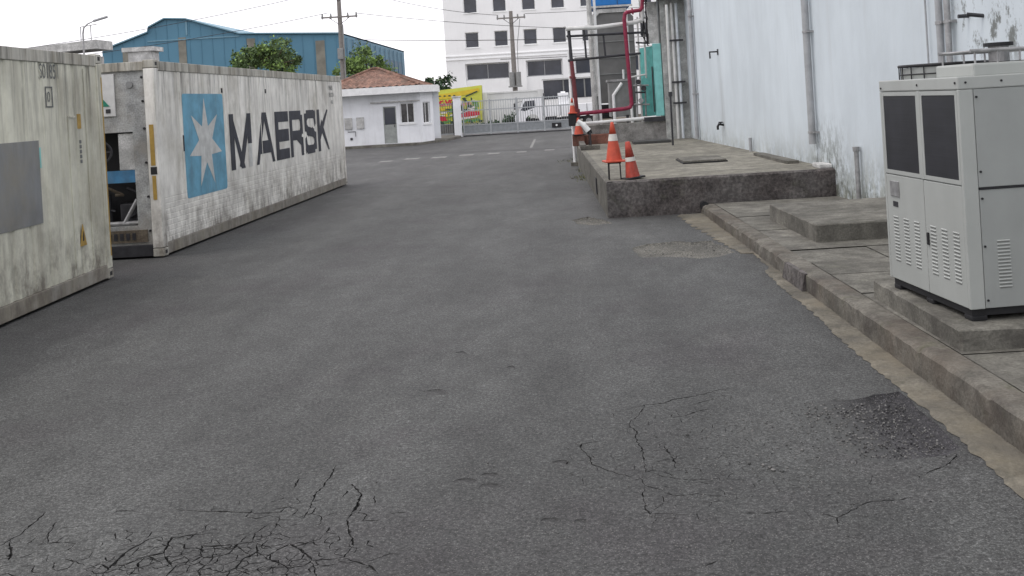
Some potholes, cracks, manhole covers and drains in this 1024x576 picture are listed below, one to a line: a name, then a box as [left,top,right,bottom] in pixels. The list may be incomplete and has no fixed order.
utility cover [676,155,728,164]
crack [0,466,405,576]
crack [563,387,920,537]
pothole [802,391,960,464]
